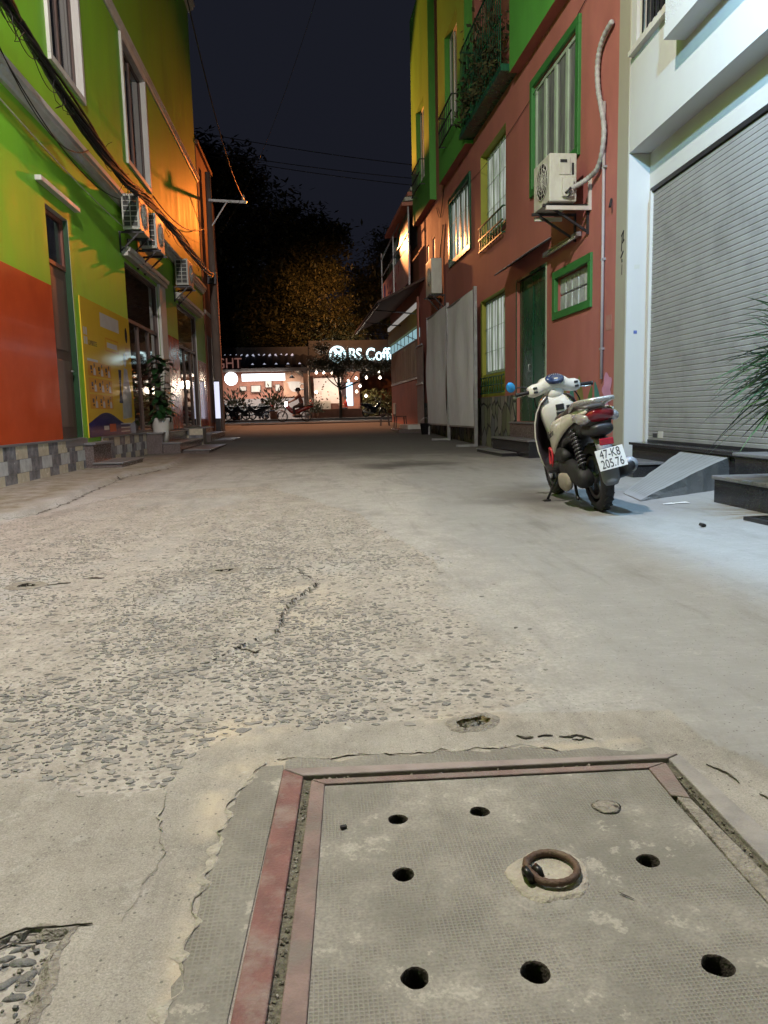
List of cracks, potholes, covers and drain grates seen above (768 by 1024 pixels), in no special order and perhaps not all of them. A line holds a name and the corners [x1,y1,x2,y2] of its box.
crack [706,764,768,798]
pothole [445,712,500,733]
crack [3,469,164,519]
pothole [0,923,80,1024]
crack [240,567,319,653]
manhole cover [147,743,768,1024]
